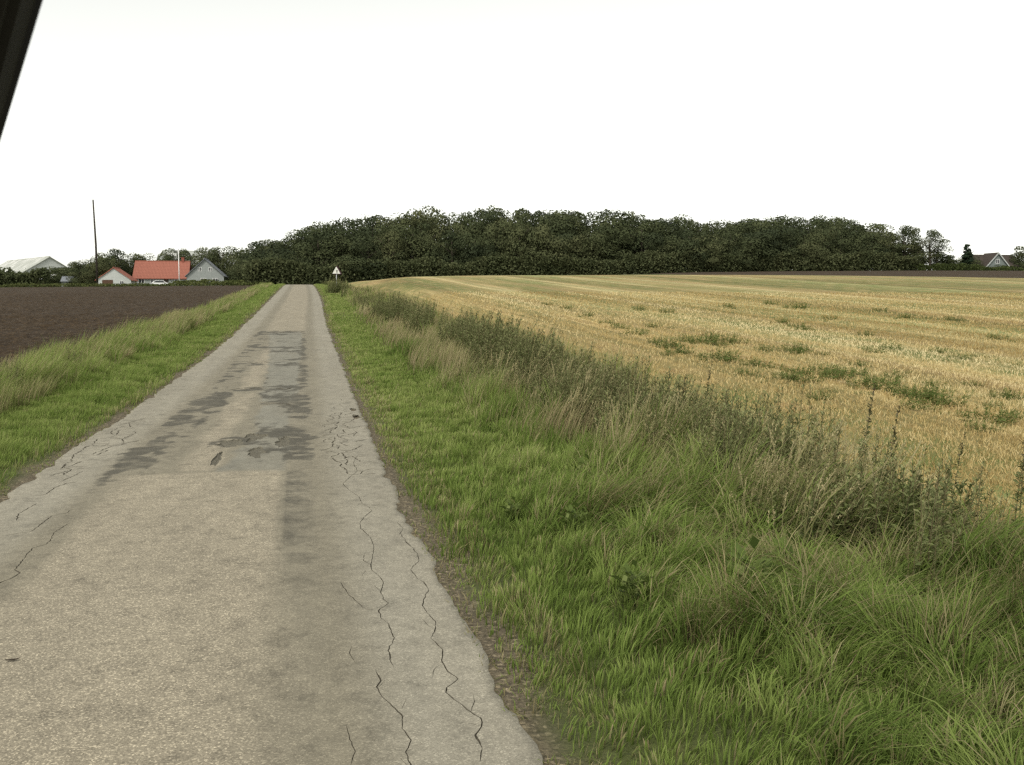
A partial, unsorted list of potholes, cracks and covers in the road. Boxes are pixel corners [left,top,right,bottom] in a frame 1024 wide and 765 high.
crack [321,400,412,765]
crack [399,524,483,762]
crack [0,419,146,583]
